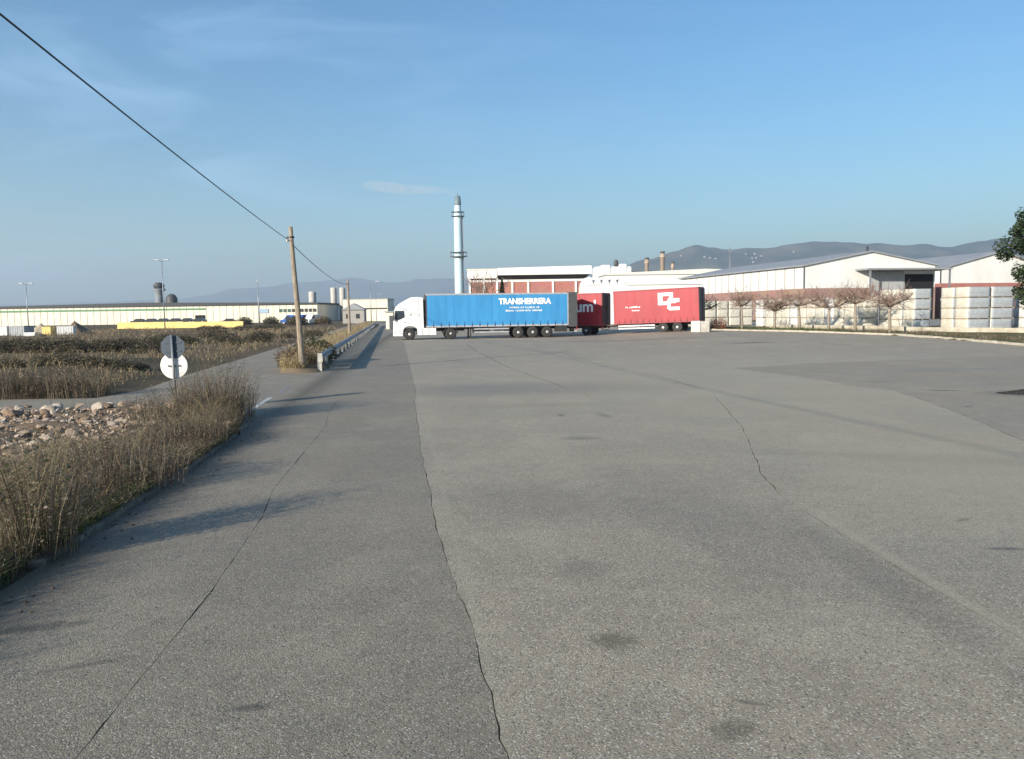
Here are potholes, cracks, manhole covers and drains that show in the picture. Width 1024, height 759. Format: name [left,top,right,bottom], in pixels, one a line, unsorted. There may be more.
crack [714,395,1023,640]
crack [75,401,338,759]
